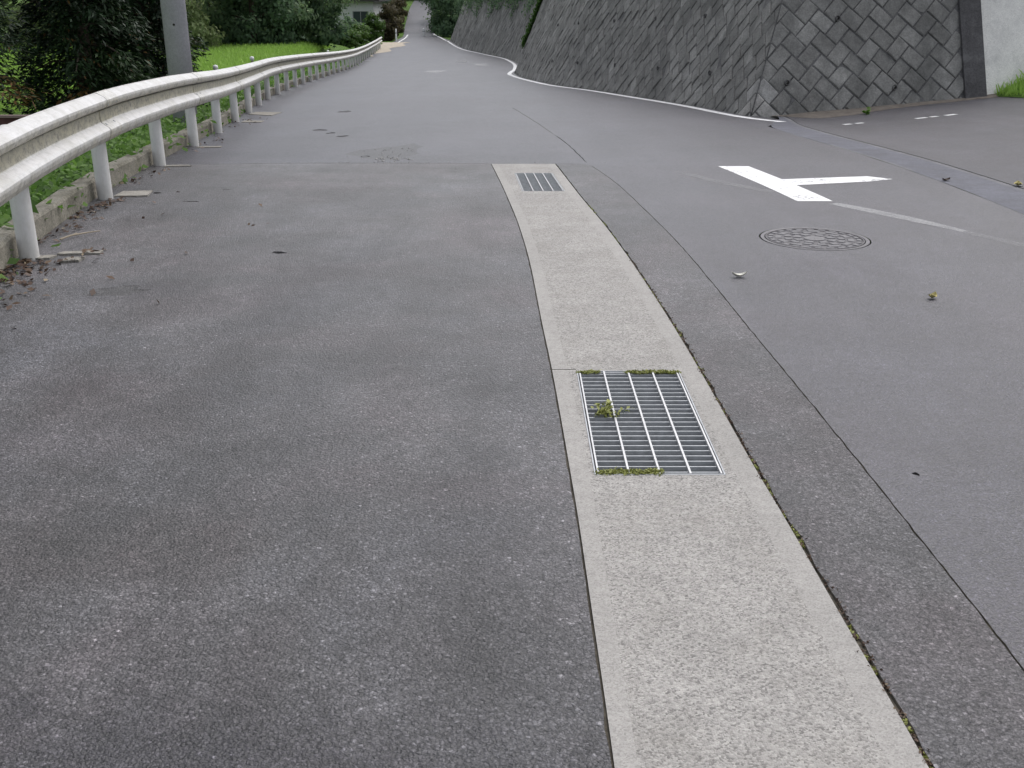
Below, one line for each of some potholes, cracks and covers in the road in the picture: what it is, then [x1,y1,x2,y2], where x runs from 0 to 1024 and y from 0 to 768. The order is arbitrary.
manhole cover [760,227,870,251]
drain grate [514,173,565,191]
drain grate [576,371,726,475]
